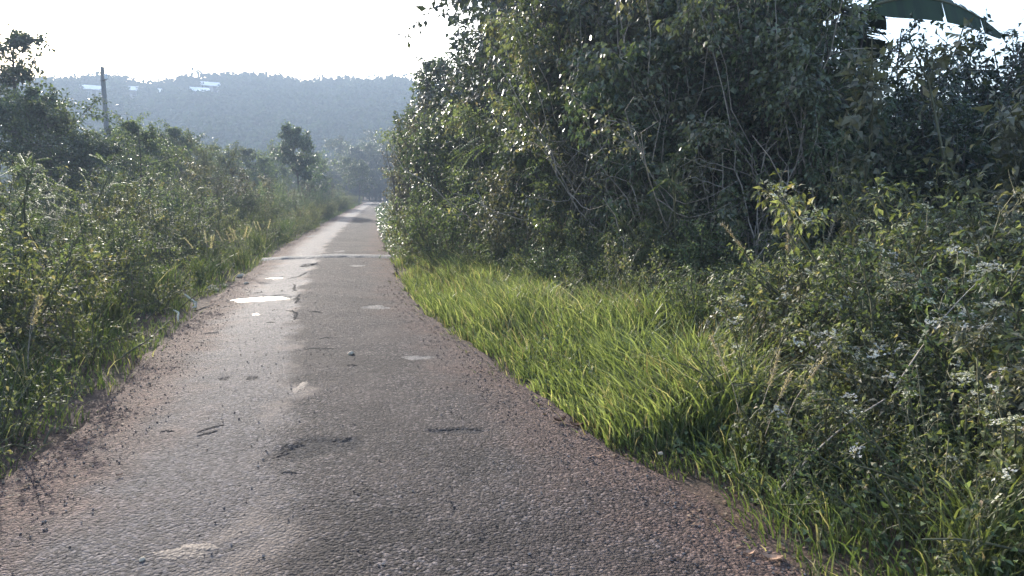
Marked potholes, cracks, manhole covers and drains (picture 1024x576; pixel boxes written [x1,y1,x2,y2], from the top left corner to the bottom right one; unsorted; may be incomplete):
crack [197,425,224,436]
crack [267,272,321,323]
